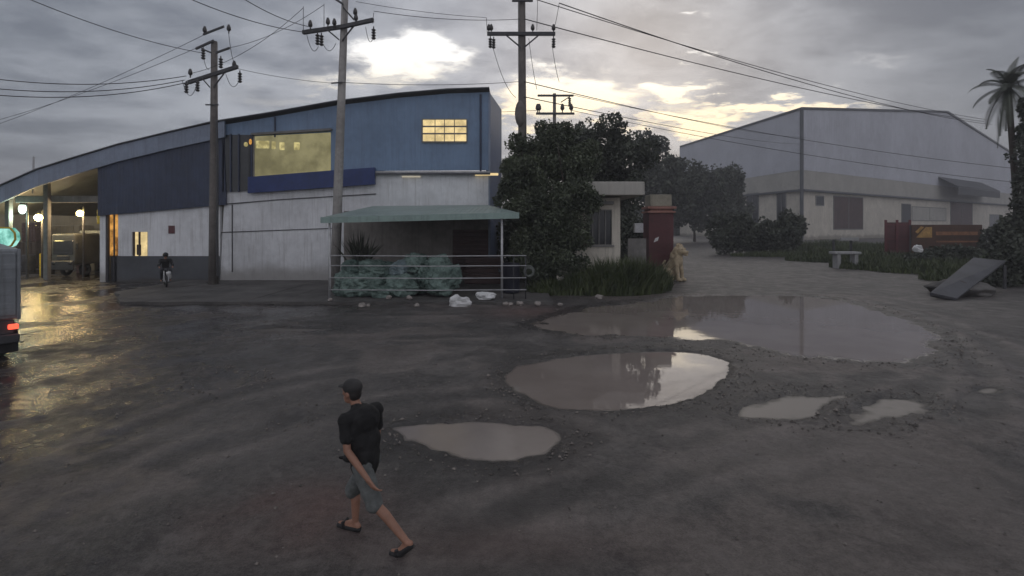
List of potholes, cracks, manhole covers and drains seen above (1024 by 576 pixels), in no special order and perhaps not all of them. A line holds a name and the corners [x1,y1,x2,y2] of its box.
pothole [823,391,951,431]
pothole [381,414,579,466]
pothole [518,292,968,367]
pothole [720,387,858,423]
pothole [495,347,743,413]
